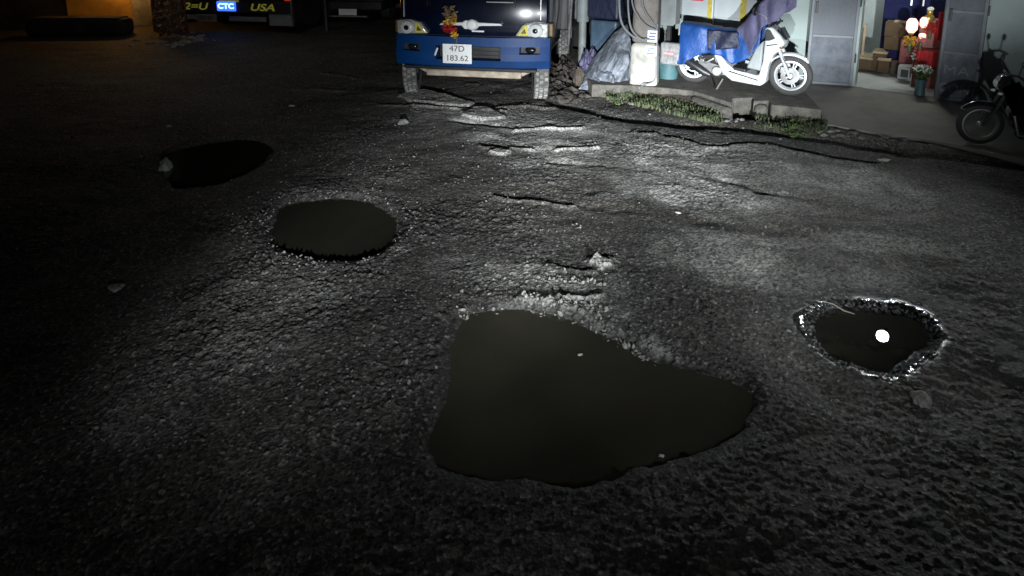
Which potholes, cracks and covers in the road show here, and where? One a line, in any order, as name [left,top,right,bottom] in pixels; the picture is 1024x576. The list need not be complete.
crack [494,194,574,205]
pothole [148,135,279,189]
pothole [415,296,770,495]
pothole [260,192,407,263]
pothole [801,298,948,377]
